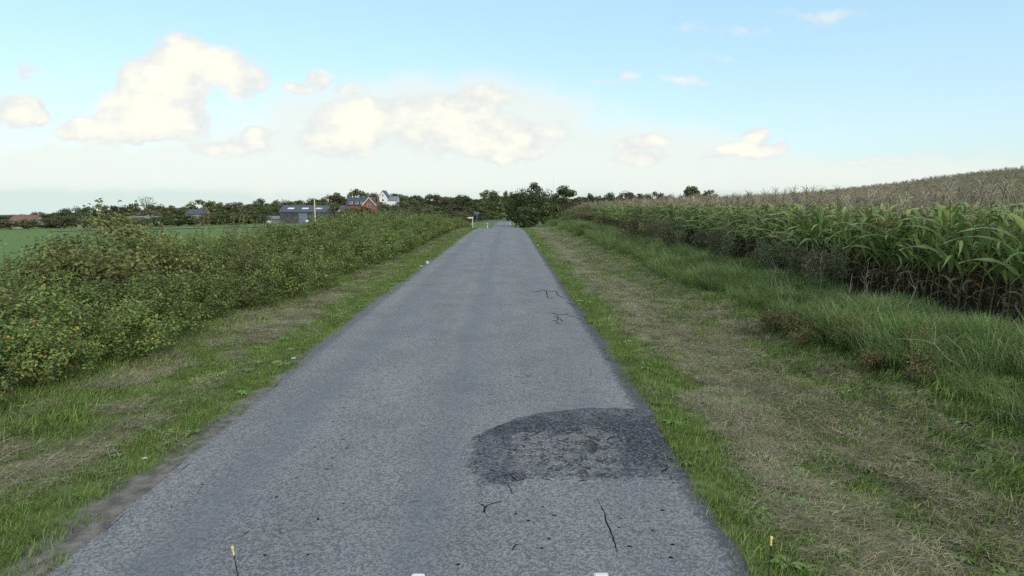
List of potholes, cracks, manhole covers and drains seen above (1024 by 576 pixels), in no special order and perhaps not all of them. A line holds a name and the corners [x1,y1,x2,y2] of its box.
crack [478,411,687,514]
crack [536,290,582,324]
crack [597,498,617,552]
